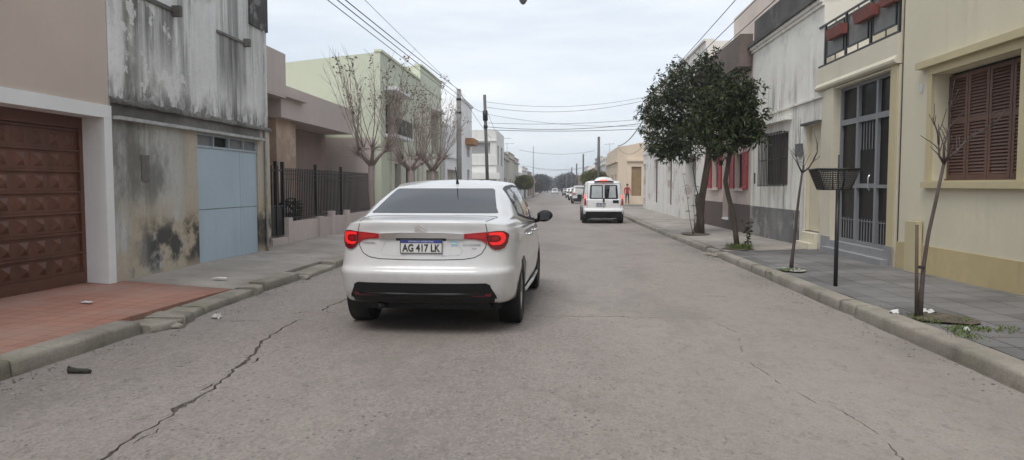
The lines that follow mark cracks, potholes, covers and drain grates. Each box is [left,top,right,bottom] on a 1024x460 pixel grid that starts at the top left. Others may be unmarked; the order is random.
crack [715,322,904,460]
crack [100,282,347,460]
